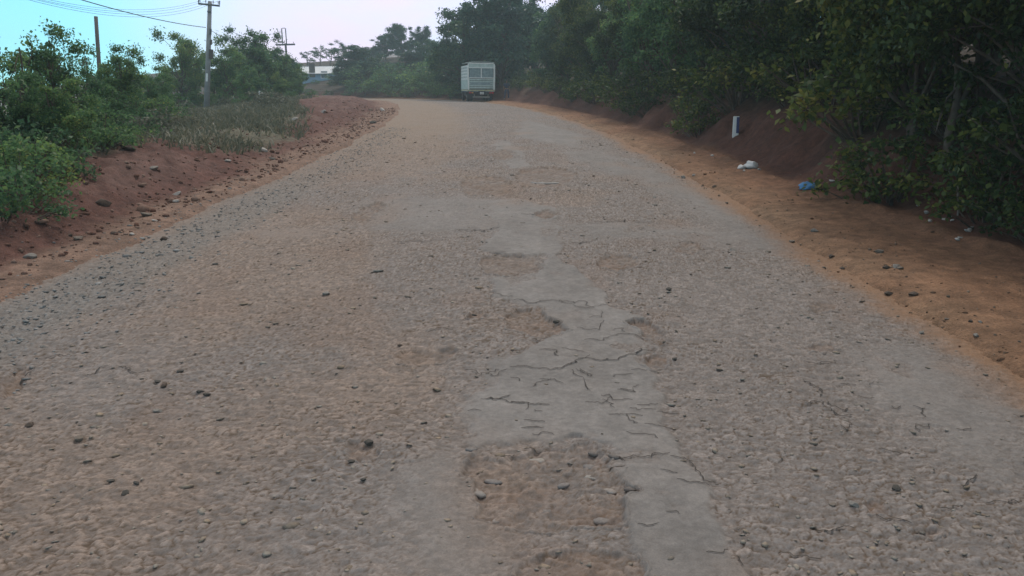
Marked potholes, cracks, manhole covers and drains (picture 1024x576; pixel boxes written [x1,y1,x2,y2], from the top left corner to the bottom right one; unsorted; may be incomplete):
pothole [512,166,581,189]
pothole [637,352,672,373]
pothole [496,306,574,339]
pothole [456,174,514,198]
pothole [593,253,643,271]
pothole [510,546,652,576]
crack [802,360,874,431]
pothole [622,316,672,346]
pothole [455,440,644,537]
pothole [475,253,545,277]
crack [466,293,719,485]
